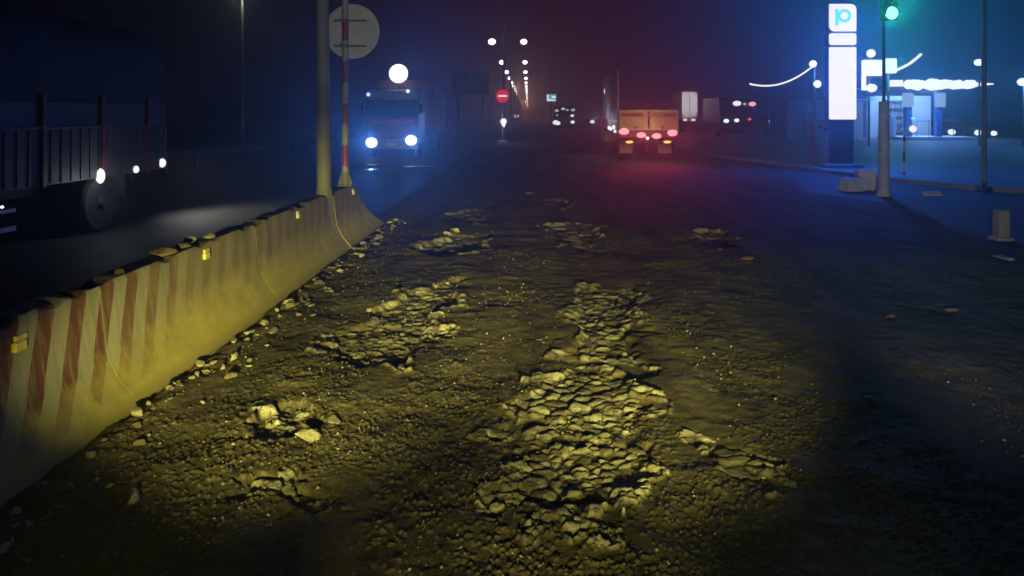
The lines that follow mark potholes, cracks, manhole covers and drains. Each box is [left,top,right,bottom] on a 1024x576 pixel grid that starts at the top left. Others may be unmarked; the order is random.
pothole [314,276,470,370]
pothole [413,231,494,257]
pothole [474,282,669,542]
pothole [689,228,744,250]
pothole [536,222,604,252]
pothole [216,466,347,528]
pothole [241,400,329,441]
pothole [441,209,488,224]
pothole [670,429,793,502]
